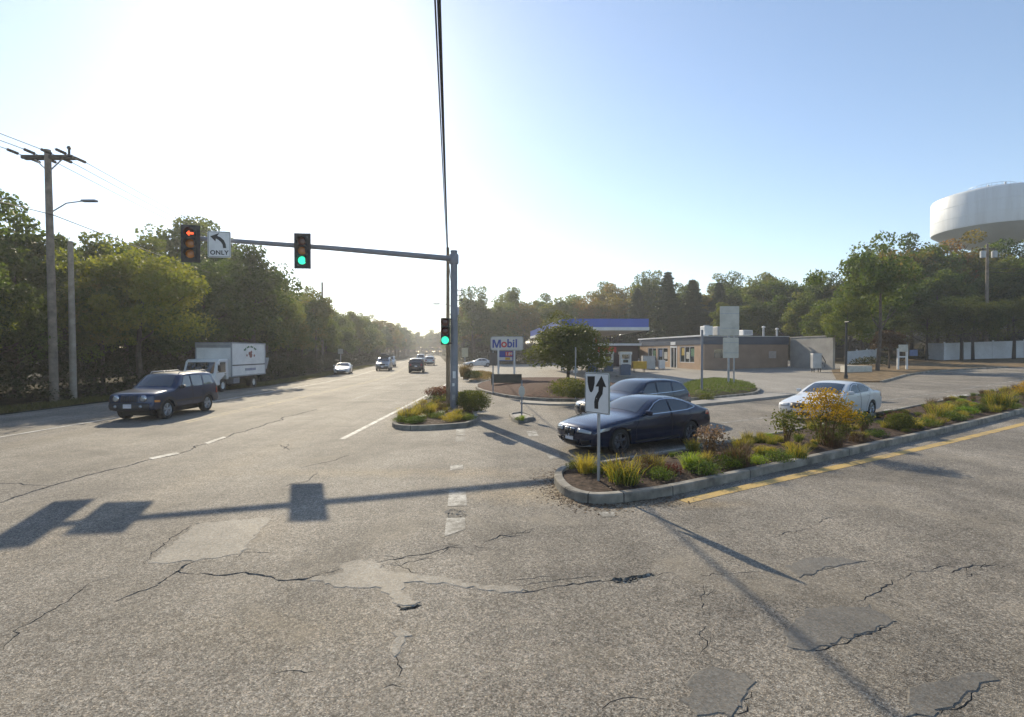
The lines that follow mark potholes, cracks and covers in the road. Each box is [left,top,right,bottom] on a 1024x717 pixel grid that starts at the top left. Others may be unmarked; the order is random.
crack [3,526,340,650]
crack [695,571,766,656]
crack [380,528,534,574]
pothole [609,573,657,584]
crack [511,572,669,595]
crack [860,556,1004,601]
